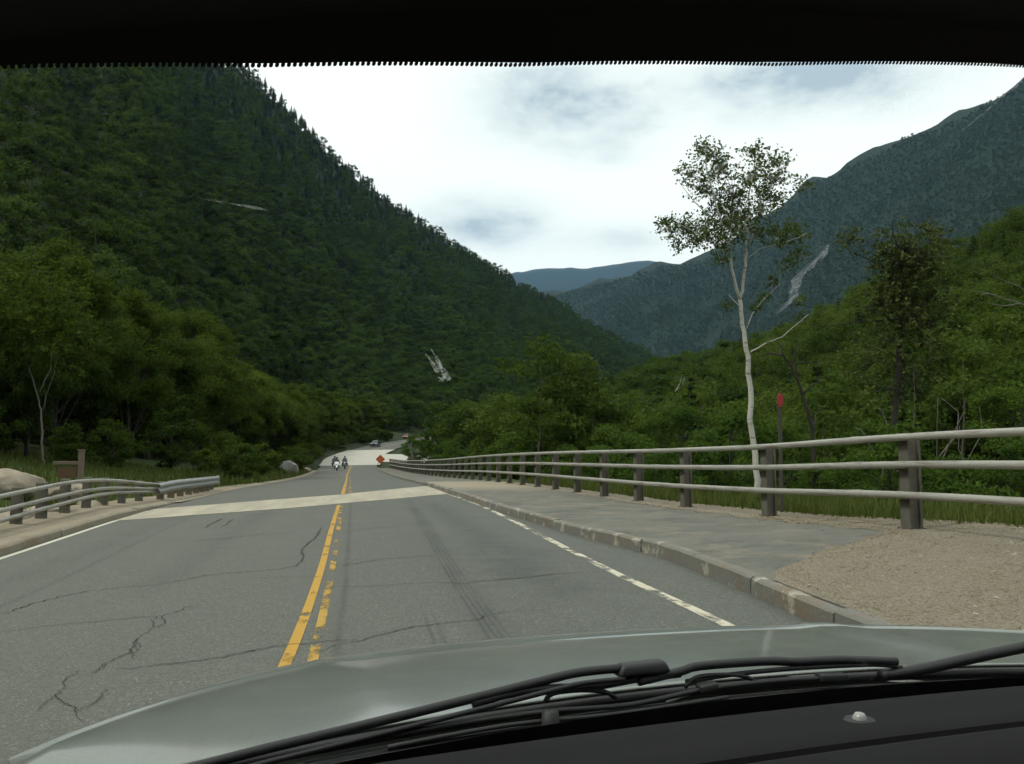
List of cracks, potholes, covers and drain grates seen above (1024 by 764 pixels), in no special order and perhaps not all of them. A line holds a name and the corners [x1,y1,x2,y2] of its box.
crack [1,528,321,614]
crack [120,610,521,669]
crack [325,571,597,587]
crack [9,604,196,720]
